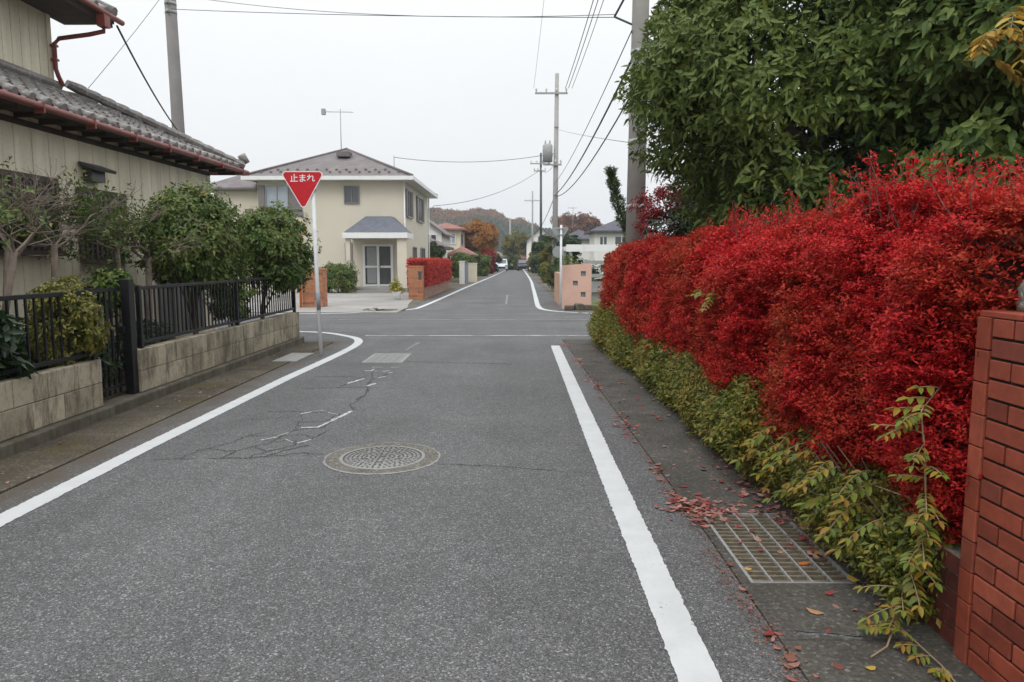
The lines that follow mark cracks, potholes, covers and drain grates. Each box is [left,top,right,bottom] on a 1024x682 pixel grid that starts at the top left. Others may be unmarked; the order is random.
manhole cover [323,443,441,475]
crack [447,464,597,474]
utility cover [361,353,412,363]
crack [153,368,388,461]
drain grate [702,513,857,584]
